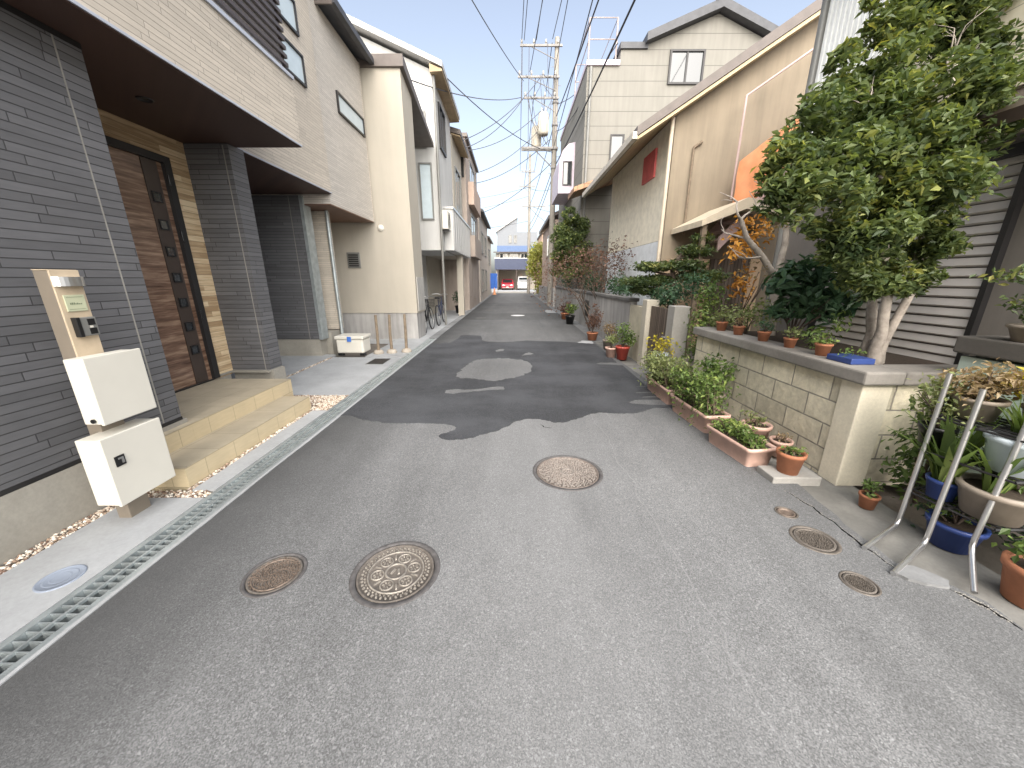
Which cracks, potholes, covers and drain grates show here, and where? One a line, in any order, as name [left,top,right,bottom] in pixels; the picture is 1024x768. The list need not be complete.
manhole cover [774,506,799,519]
utility cover [32,564,88,593]
manhole cover [240,553,308,598]
crack [952,590,1022,630]
manhole cover [838,571,882,597]
crack [783,490,895,568]
drain grate [0,339,435,680]
manhole cover [788,526,842,555]
manhole cover [349,541,440,609]
manhole cover [533,455,603,491]
